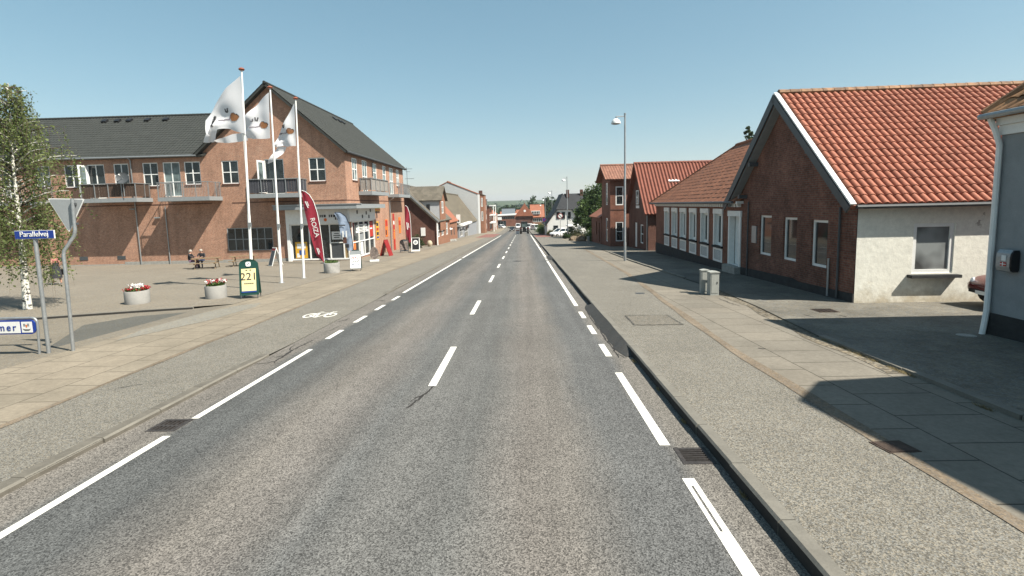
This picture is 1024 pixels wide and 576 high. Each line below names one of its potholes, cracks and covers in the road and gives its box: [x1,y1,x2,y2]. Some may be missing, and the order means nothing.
drain grate [673,447,717,465]
crack [406,386,434,408]
drain grate [144,419,194,432]
crack [258,319,347,364]
